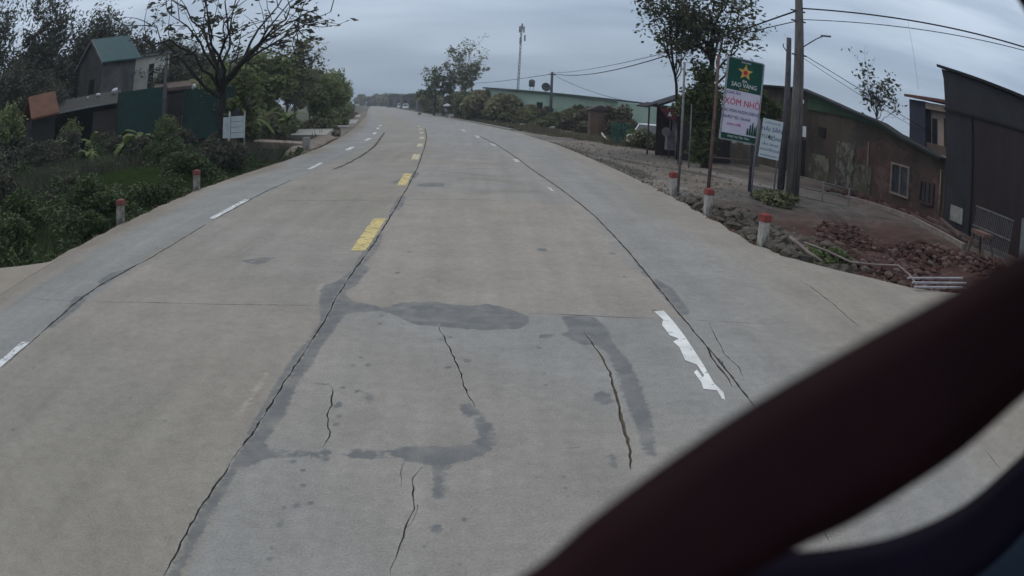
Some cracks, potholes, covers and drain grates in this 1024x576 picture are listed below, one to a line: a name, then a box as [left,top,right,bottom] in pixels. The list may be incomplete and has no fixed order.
crack [480,136,752,469]
crack [164,130,427,575]
crack [438,325,475,406]
